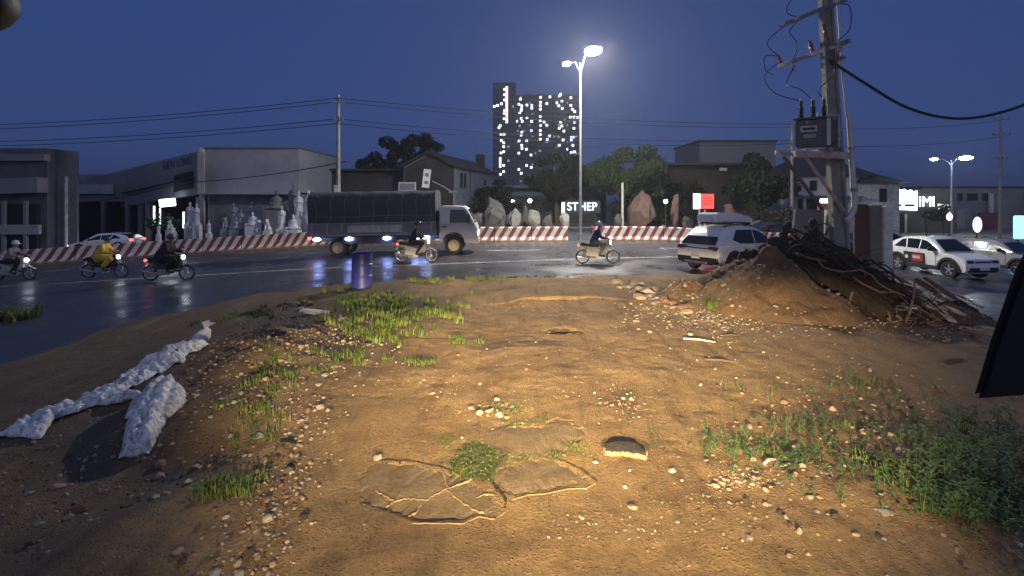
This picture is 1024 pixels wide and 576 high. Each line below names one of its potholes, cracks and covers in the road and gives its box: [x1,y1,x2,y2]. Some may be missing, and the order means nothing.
crack [376,456,598,524]
